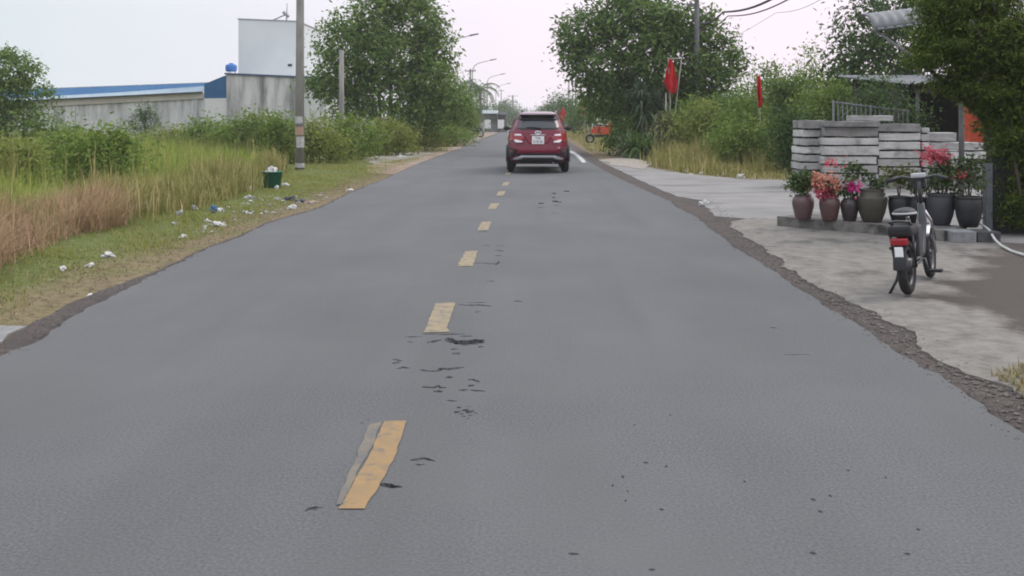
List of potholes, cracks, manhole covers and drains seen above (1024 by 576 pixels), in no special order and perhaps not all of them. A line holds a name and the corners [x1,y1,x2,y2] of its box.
pothole [444,338,485,346]
crack [391,334,485,419]
crack [458,302,490,313]
crack [480,231,502,282]
crack [410,457,435,465]
